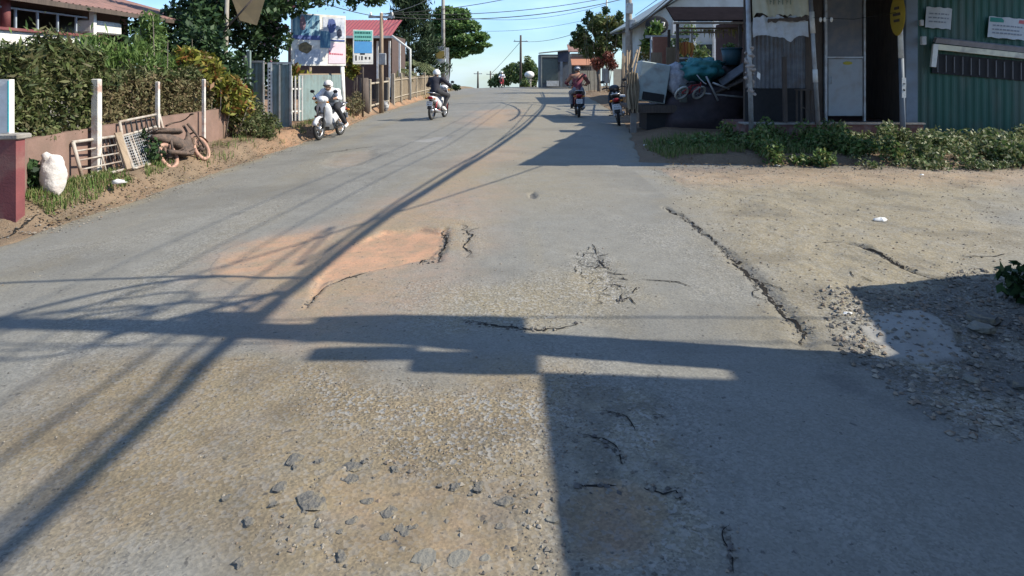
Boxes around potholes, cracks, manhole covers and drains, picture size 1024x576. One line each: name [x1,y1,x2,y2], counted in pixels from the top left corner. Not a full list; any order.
crack [575,244,689,304]
crack [719,524,739,573]
crack [573,482,622,495]
crack [417,224,476,265]
crack [644,486,686,504]
crack [462,319,583,332]
crack [663,207,827,350]
crack [578,410,636,464]
crack [833,240,959,284]
